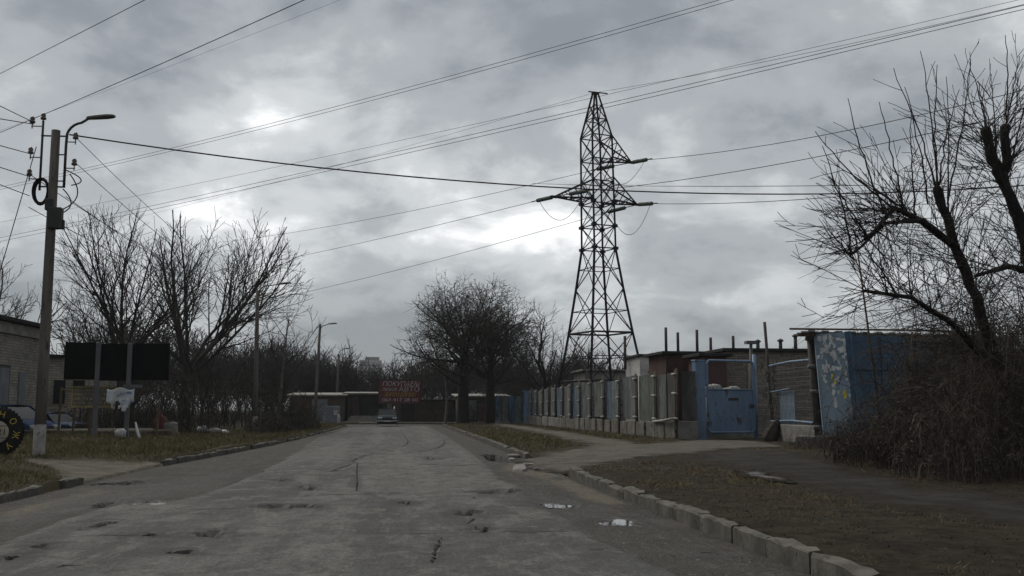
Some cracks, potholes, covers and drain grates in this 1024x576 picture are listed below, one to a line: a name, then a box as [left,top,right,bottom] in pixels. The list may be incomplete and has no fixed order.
pothole [529,501,580,510]
pothole [452,509,489,517]
pothole [191,529,230,540]
pothole [483,454,513,463]
crack [389,518,475,564]
crack [313,428,497,496]
pothole [589,516,645,527]
pothole [87,501,119,509]
